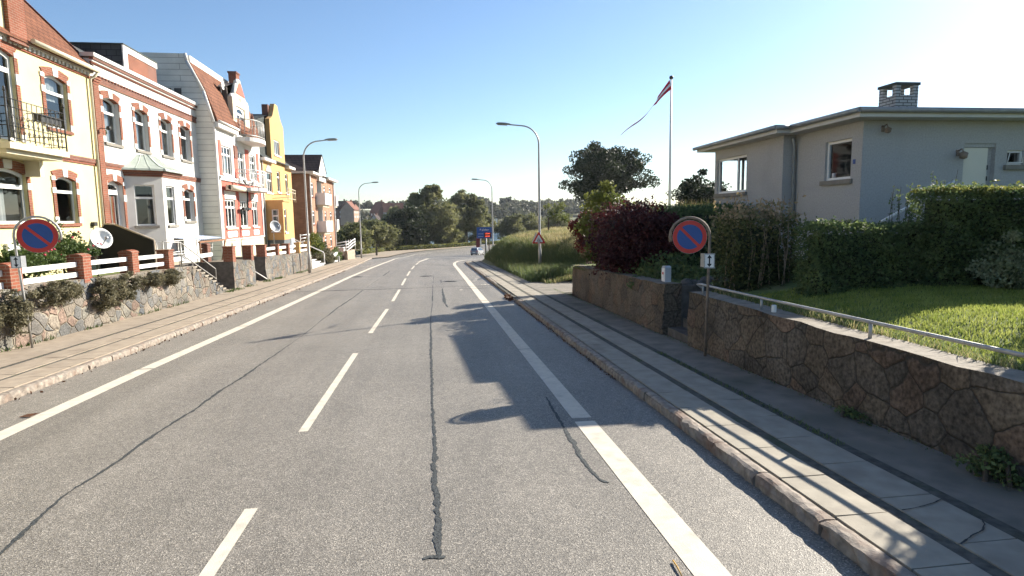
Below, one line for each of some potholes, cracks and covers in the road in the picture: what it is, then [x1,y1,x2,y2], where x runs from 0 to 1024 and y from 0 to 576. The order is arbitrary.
crack [423,264,452,560]
crack [960,519,986,544]
